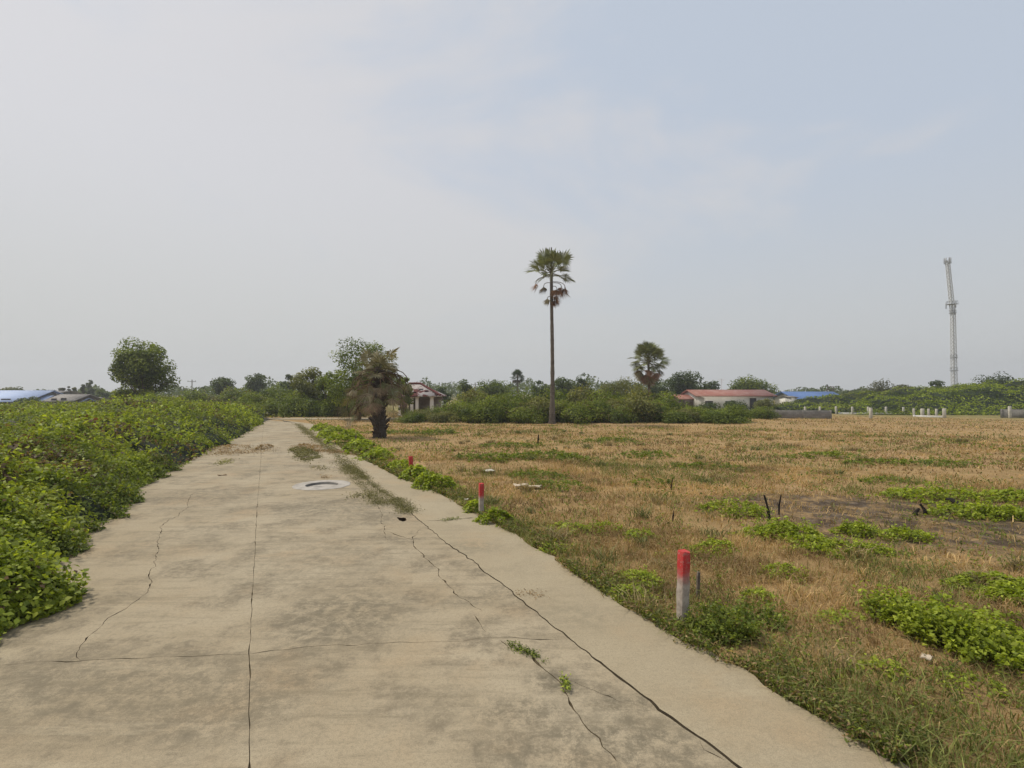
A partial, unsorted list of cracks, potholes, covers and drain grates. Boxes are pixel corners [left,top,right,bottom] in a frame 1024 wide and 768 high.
manhole cover [292,480,350,490]
crack [378,508,483,629]
crack [76,496,191,659]
crack [501,641,617,760]
